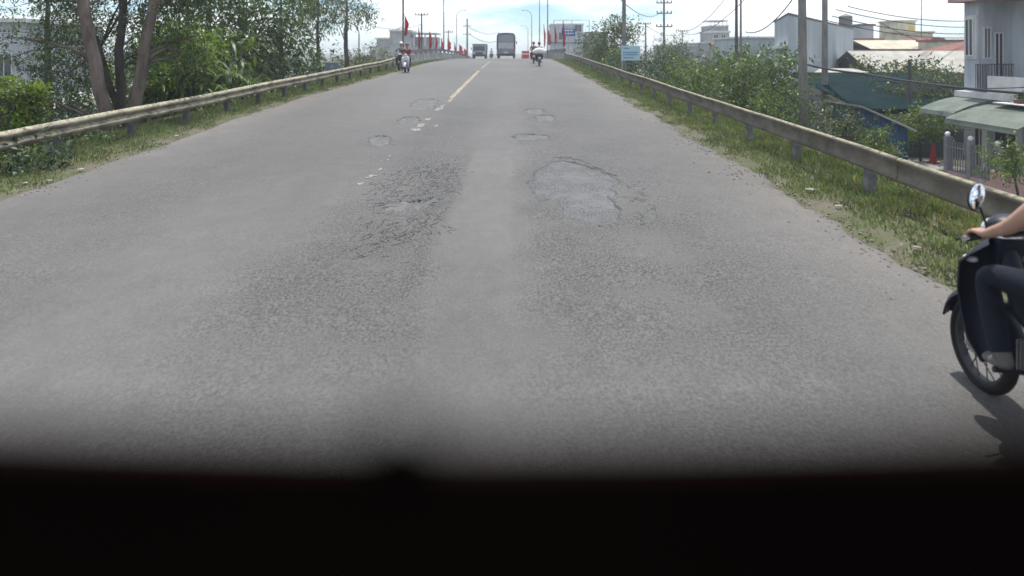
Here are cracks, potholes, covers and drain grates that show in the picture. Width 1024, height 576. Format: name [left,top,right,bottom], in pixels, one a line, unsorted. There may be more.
pothole [359,135,401,147]
pothole [504,133,559,141]
pothole [404,98,446,111]
pothole [515,159,636,229]
crack [340,207,451,259]
pothole [390,116,428,126]
pothole [527,114,562,123]
crack [370,161,474,197]
